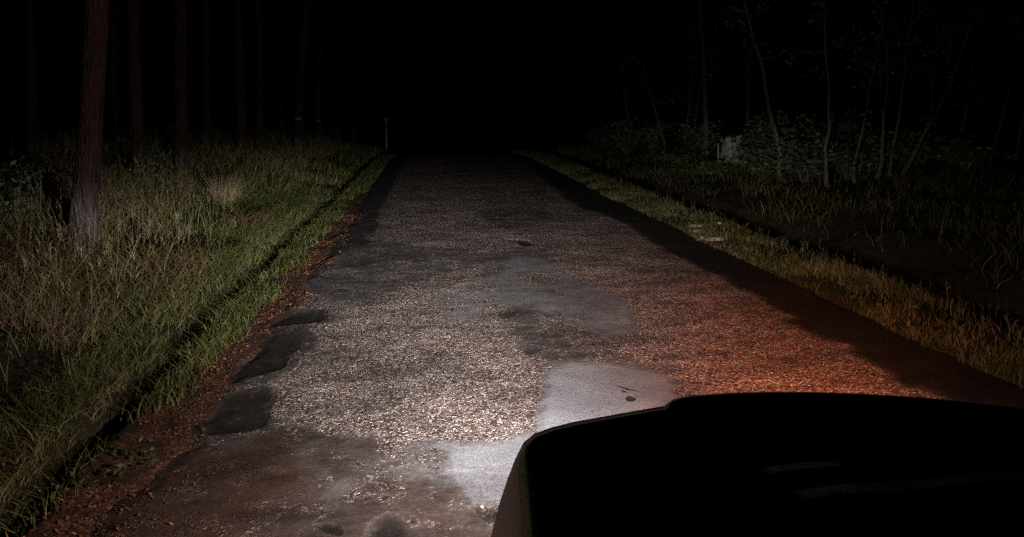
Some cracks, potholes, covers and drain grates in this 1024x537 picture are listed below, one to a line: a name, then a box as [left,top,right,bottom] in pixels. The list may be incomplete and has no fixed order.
pothole [361,511,415,537]
pothole [271,309,328,327]
pothole [231,330,306,381]
pothole [204,385,272,436]
